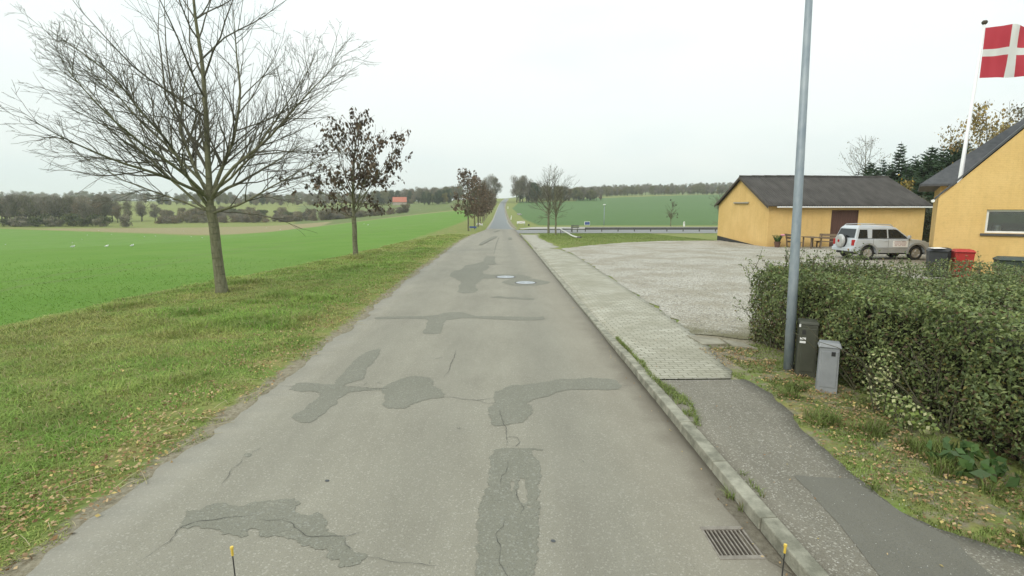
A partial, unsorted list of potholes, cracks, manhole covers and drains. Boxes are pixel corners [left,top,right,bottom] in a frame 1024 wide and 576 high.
crack [138,515,364,562]
drain grate [700,526,766,560]
